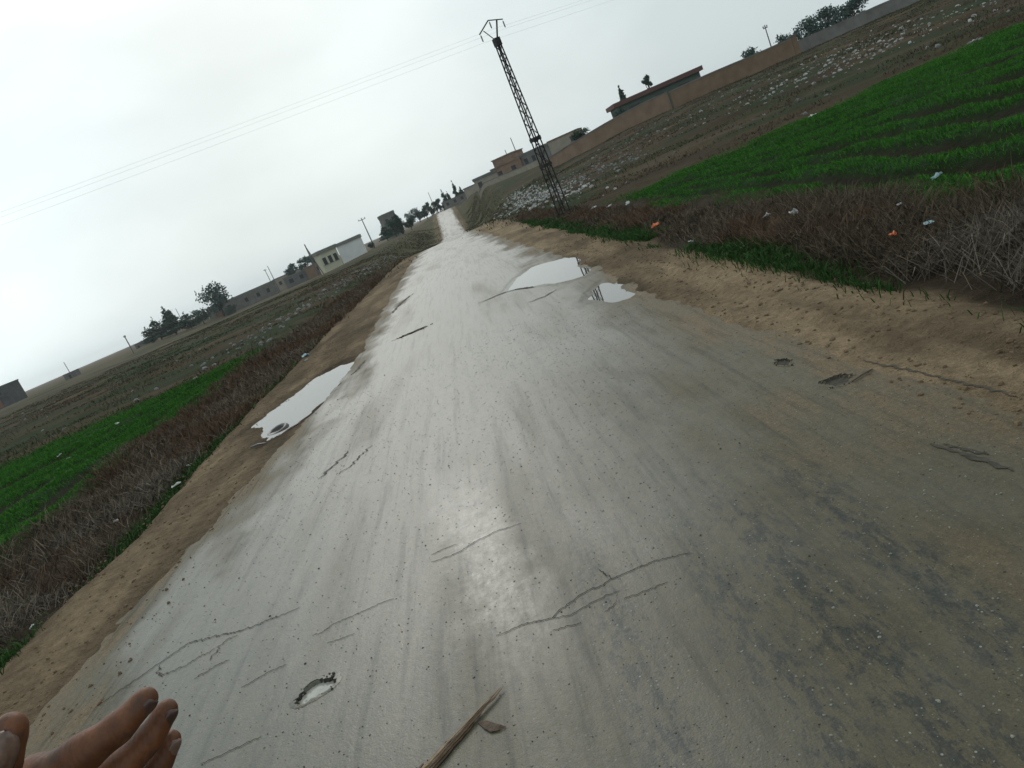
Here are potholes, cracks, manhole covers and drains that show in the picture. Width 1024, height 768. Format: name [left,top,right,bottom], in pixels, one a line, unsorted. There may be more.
crack [864,360,1017,397]
crack [431,523,520,562]
pothole [772,358,794,367]
crack [318,445,372,479]
crack [930,443,1014,471]
crack [99,607,299,705]
pothole [817,372,856,389]
crack [496,553,687,636]
pothole [289,672,342,709]
crack [312,599,391,643]
